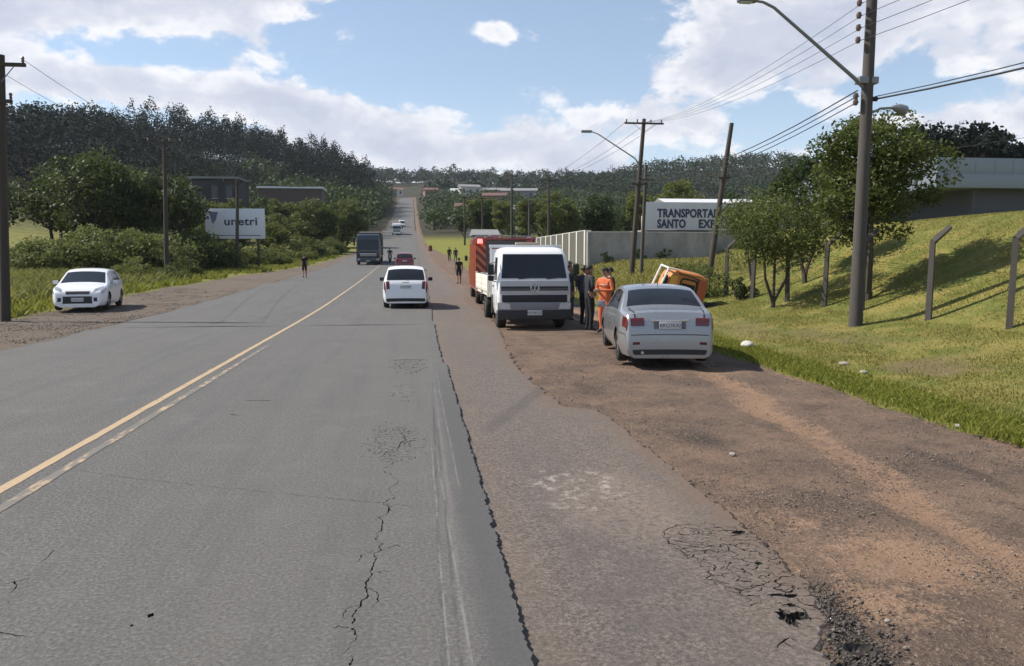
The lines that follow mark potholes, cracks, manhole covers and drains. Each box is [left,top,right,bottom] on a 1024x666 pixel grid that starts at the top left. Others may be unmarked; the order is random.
crack [663,522,823,627]
crack [84,422,437,666]
